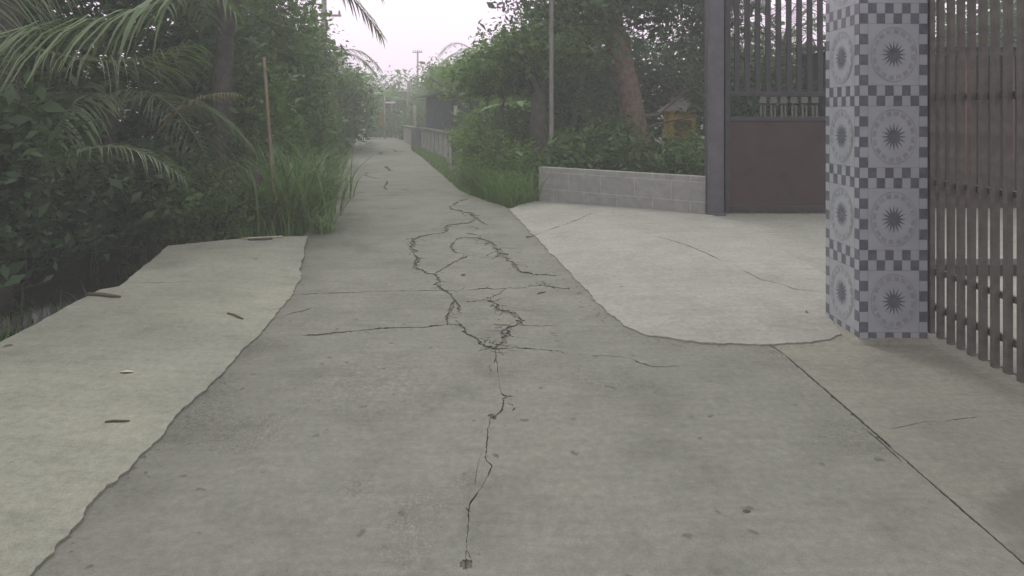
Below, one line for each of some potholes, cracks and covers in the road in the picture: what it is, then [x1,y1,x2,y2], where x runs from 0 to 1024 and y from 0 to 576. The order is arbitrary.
crack [659,237,816,292]
crack [301,198,671,570]
